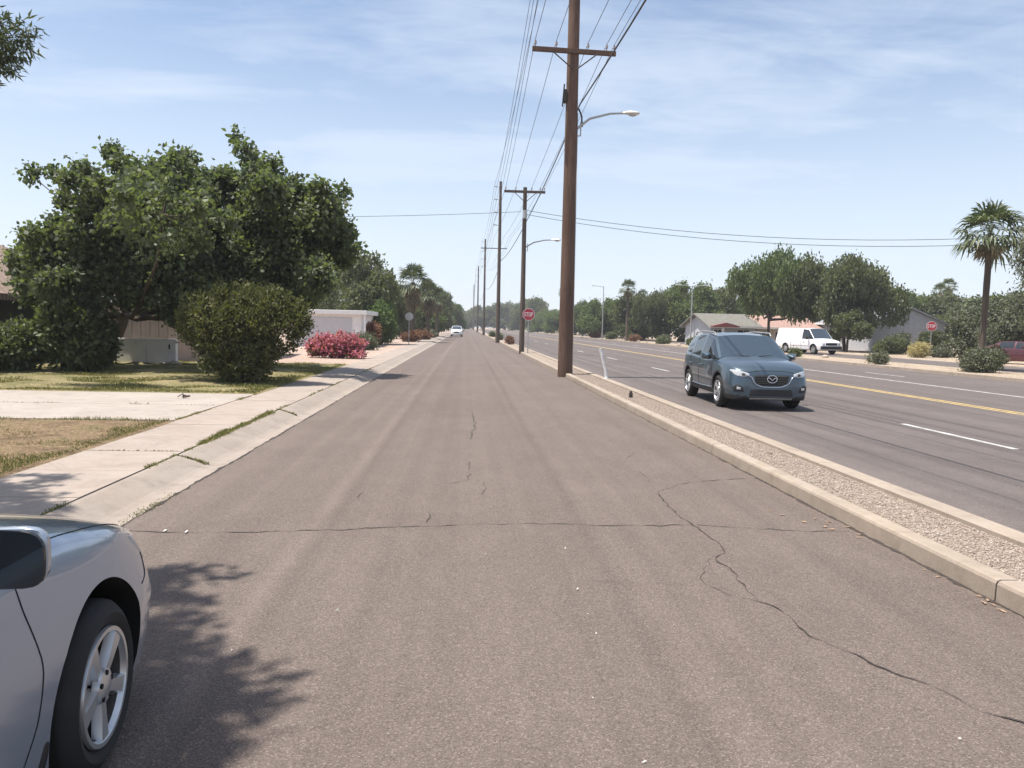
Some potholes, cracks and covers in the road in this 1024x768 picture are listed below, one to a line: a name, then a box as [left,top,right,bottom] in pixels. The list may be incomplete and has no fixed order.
crack [131,379,1024,723]
